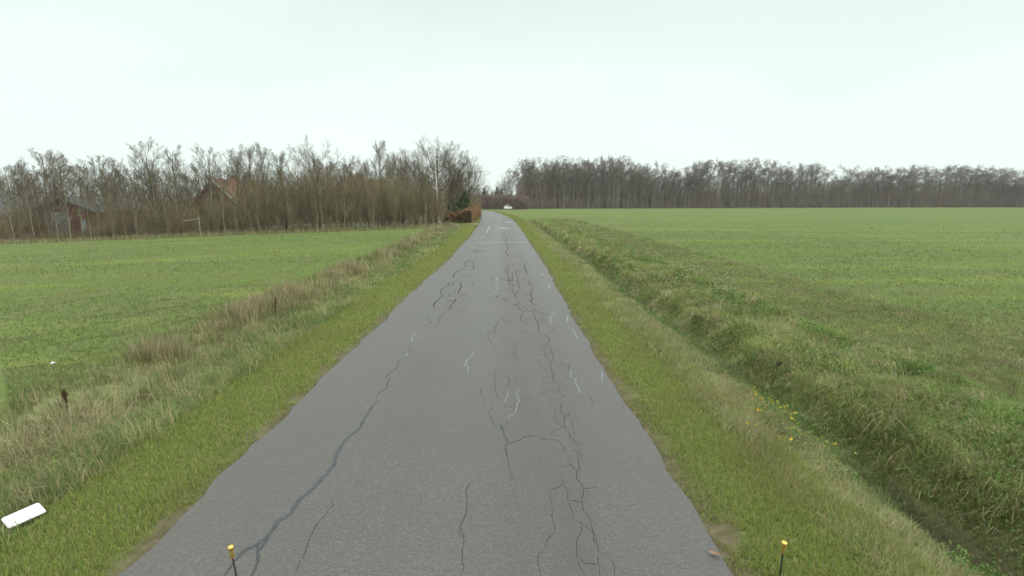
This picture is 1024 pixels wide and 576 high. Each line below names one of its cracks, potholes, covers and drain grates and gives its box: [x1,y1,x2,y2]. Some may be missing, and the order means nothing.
crack [480,233,615,576]
crack [459,481,475,576]
